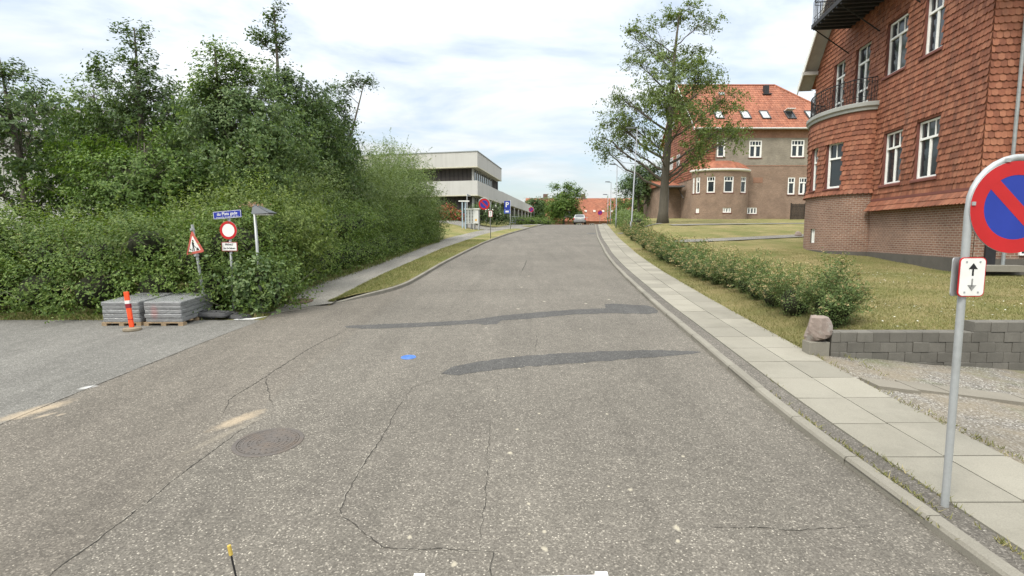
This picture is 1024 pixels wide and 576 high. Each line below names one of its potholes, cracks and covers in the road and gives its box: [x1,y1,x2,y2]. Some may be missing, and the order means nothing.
crack [339,376,494,576]
crack [49,423,253,576]
manhole cover [231,428,304,457]
crack [223,328,348,413]
